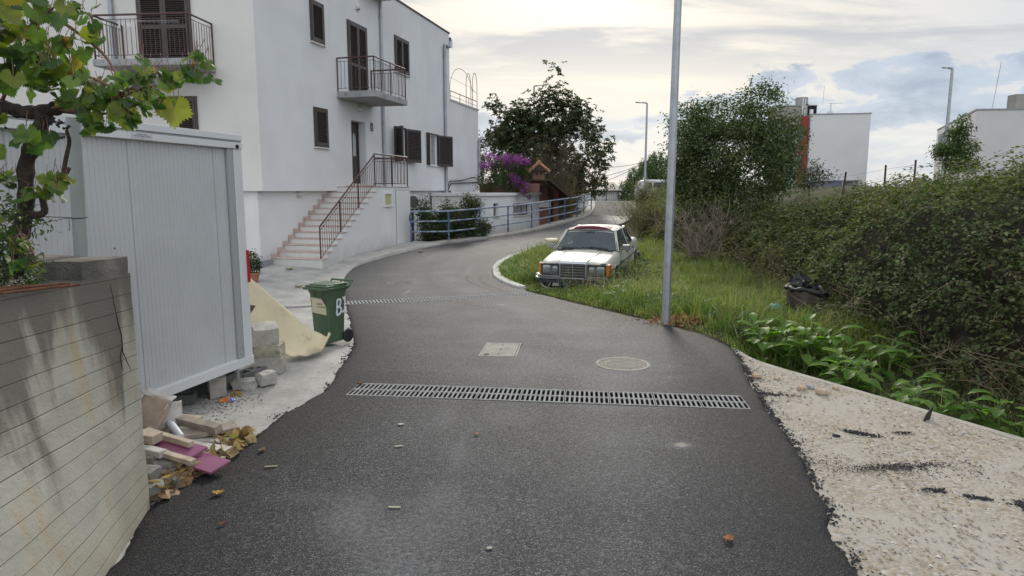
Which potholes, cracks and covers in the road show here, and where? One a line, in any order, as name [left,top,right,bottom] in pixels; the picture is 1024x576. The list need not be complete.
manhole cover [478,343,522,357]
drain grate [345,292,537,306]
manhole cover [595,357,650,371]
drain grate [346,383,751,409]
